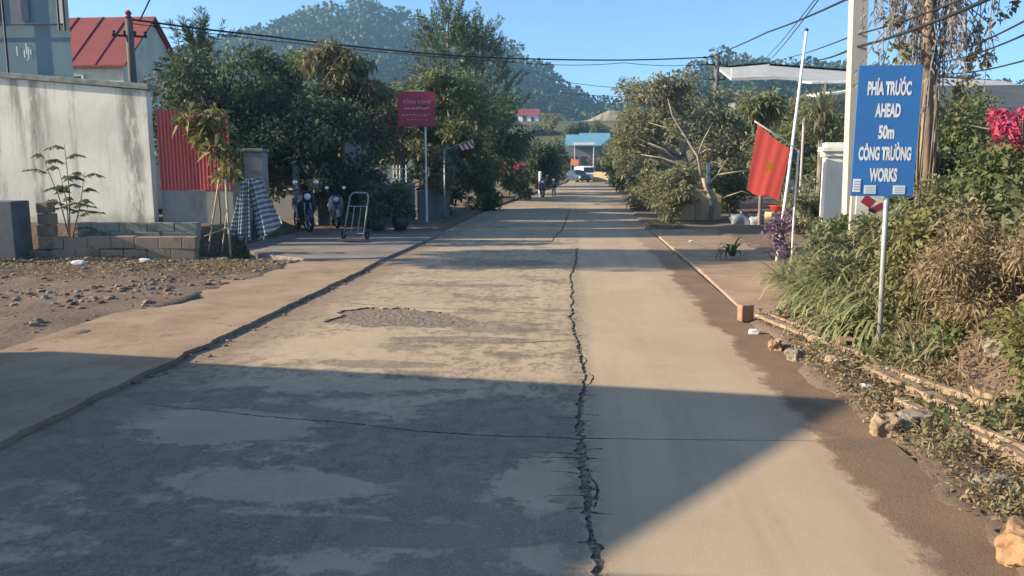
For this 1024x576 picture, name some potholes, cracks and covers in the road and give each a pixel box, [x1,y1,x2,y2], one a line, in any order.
pothole [322,307,483,328]
crack [145,211,797,576]
